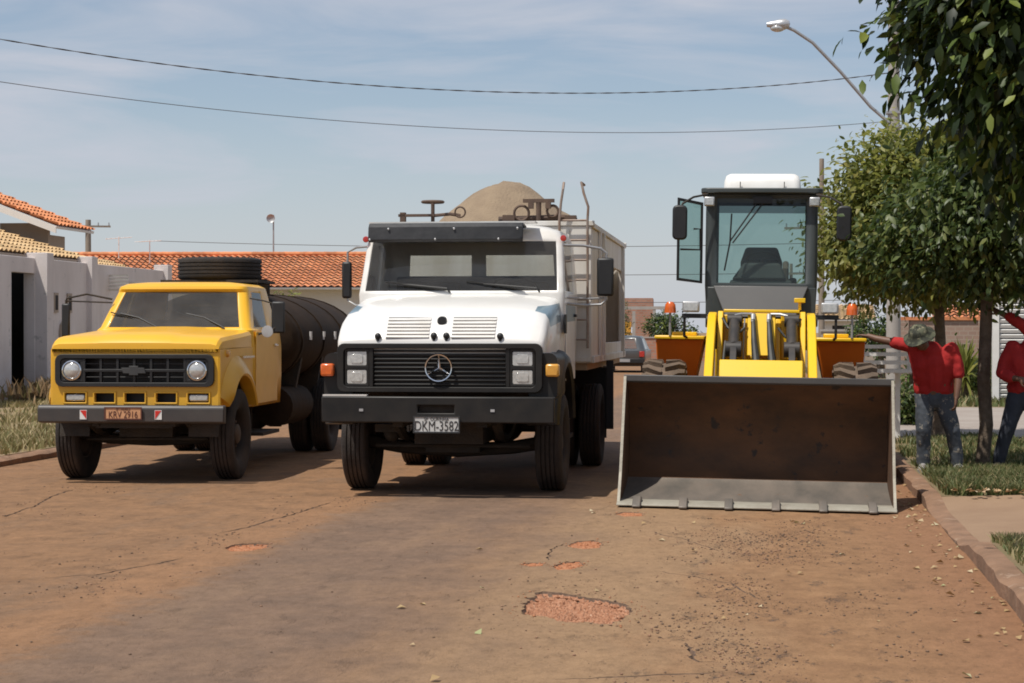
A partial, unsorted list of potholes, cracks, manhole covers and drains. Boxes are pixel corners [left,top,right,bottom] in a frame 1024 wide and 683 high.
pothole [568,540,602,549]
pothole [226,543,269,551]
crack [220,503,328,533]
crack [53,558,183,578]
crack [6,490,72,517]
pothole [553,561,583,570]
pothole [521,591,632,624]
